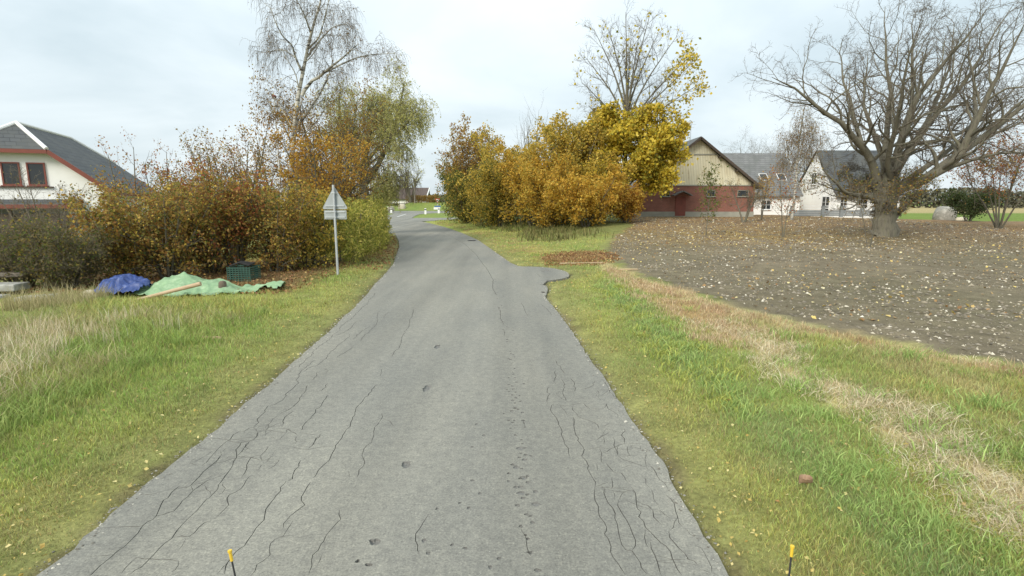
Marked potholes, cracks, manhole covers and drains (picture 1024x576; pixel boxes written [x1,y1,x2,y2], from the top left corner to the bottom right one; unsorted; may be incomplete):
crack [521,303,712,575]
crack [86,298,386,575]
